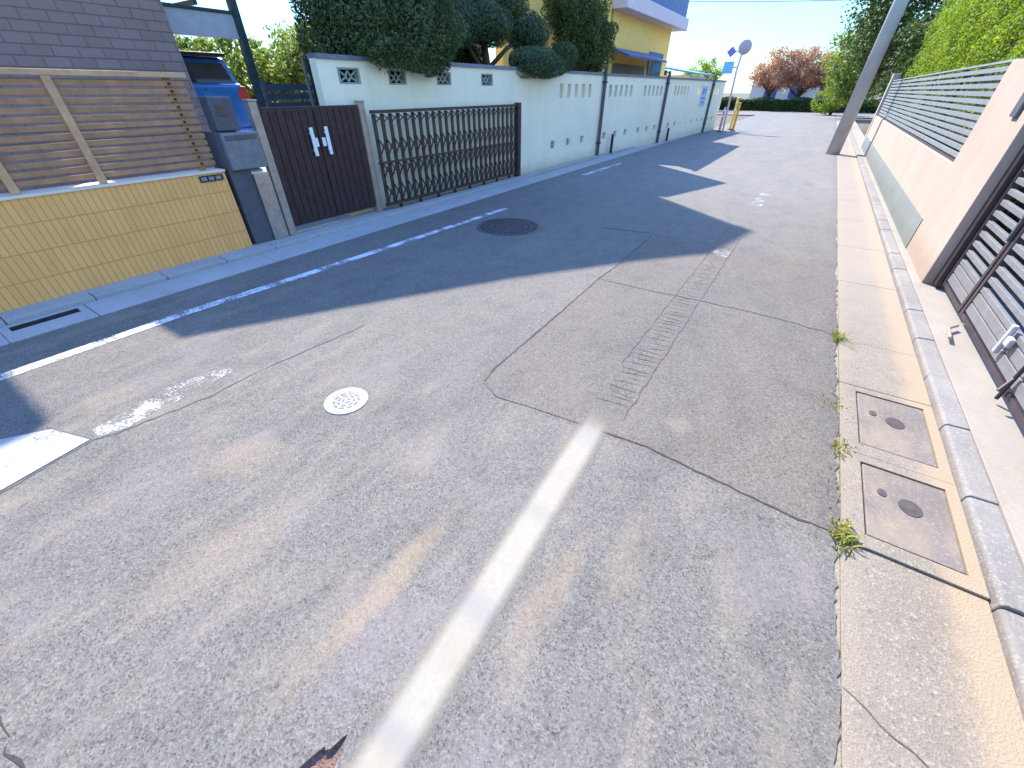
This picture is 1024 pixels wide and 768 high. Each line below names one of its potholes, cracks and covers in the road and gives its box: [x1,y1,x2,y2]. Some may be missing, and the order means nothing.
manhole cover [476,218,541,236]
manhole cover [861,464,966,575]
manhole cover [856,393,937,468]
crack [0,324,366,494]
pothole [299,735,347,768]
drain grate [9,308,80,331]
